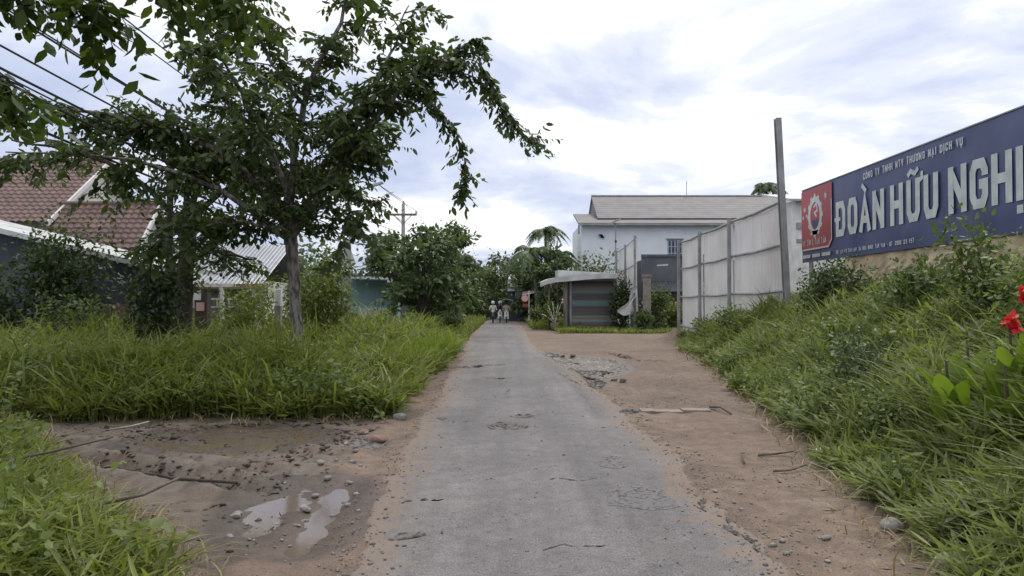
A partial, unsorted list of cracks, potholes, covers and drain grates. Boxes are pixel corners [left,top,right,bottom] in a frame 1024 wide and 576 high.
pothole [541,352,631,379]
pothole [393,531,426,540]
crack [543,543,606,551]
pothole [487,421,528,430]
